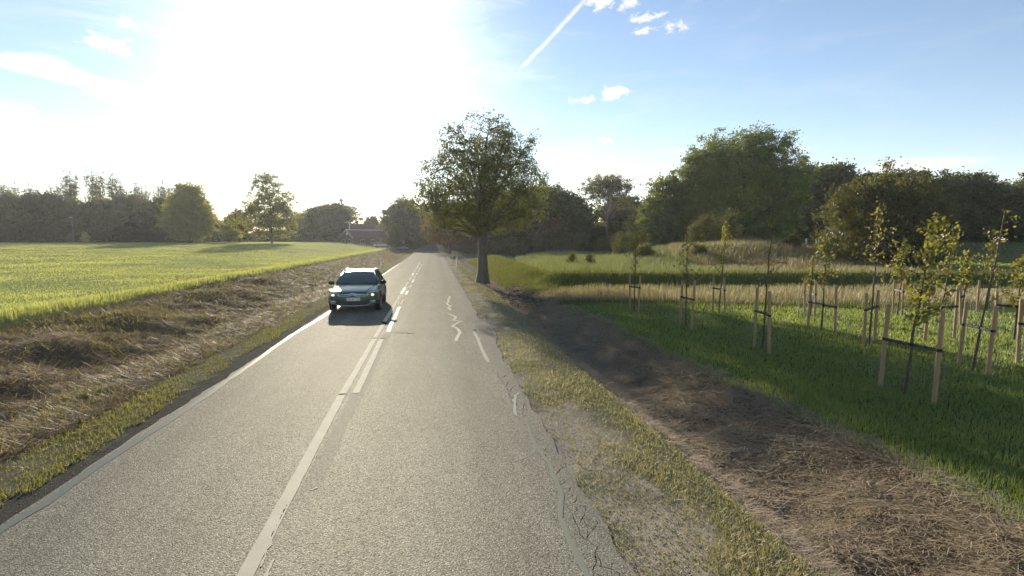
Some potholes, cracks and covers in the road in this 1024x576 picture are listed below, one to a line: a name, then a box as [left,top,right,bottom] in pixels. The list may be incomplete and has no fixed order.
crack [498,375,627,576]
